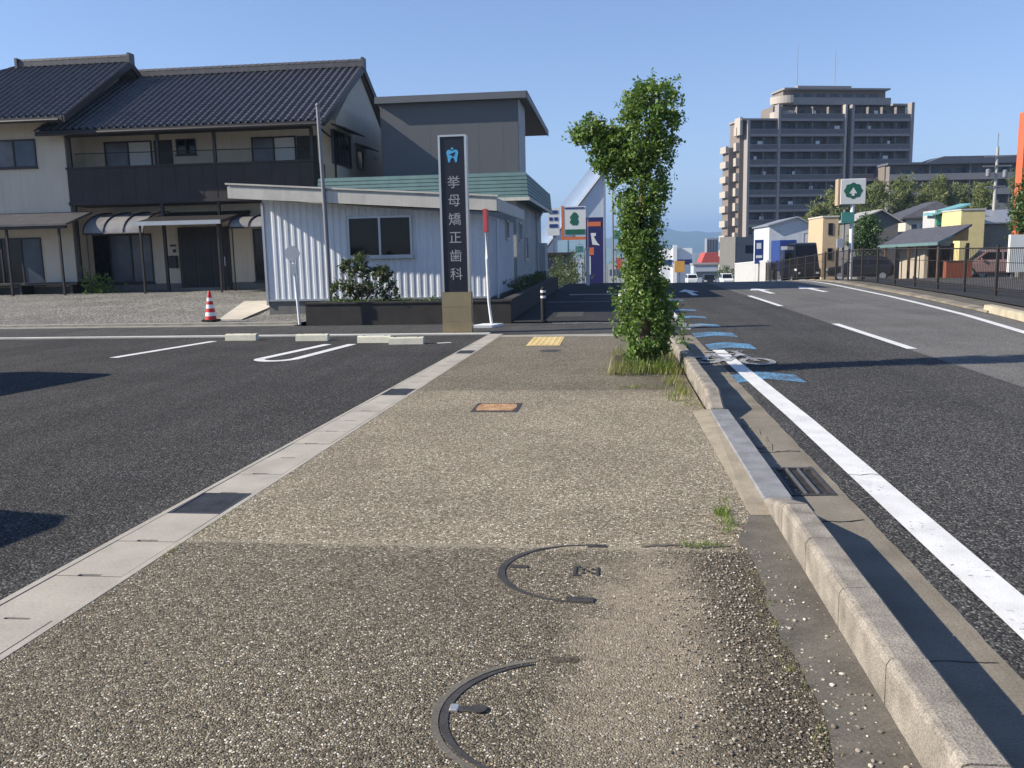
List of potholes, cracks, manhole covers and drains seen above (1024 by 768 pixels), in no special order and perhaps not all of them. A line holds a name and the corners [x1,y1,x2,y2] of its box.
utility cover [470,403,523,412]
drain grate [771,467,837,496]
manhole cover [498,544,666,603]
drain grate [169,493,251,514]
manhole cover [429,659,677,768]
